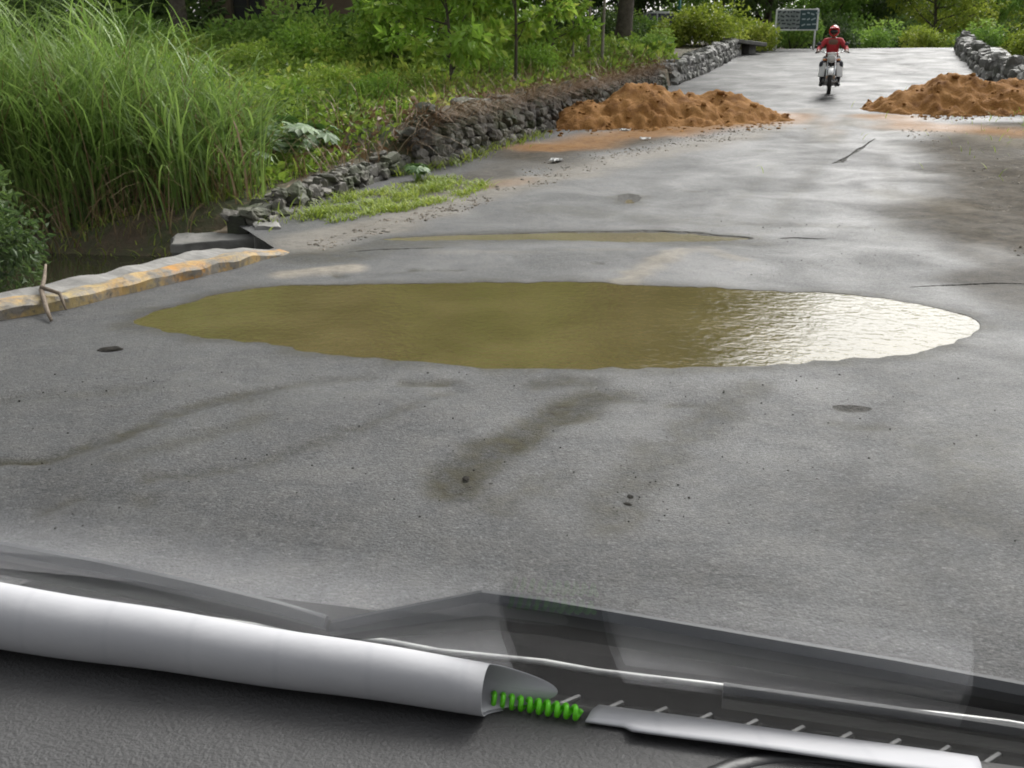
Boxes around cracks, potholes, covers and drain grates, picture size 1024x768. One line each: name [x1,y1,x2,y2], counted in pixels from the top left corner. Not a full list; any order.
pothole [832,405,872,413]
pothole [133,281,981,370]
pothole [617,194,642,204]
crack [833,140,873,163]
